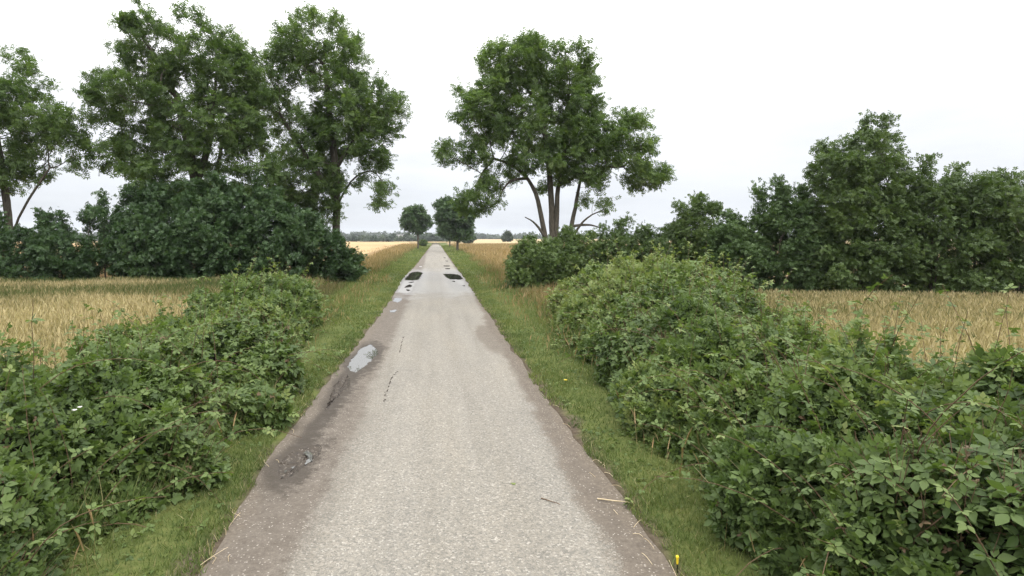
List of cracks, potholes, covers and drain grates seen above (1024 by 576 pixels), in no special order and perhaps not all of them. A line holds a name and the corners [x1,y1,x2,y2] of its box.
pothole [347,344,379,372]
pothole [405,272,423,280]
pothole [277,444,322,480]
